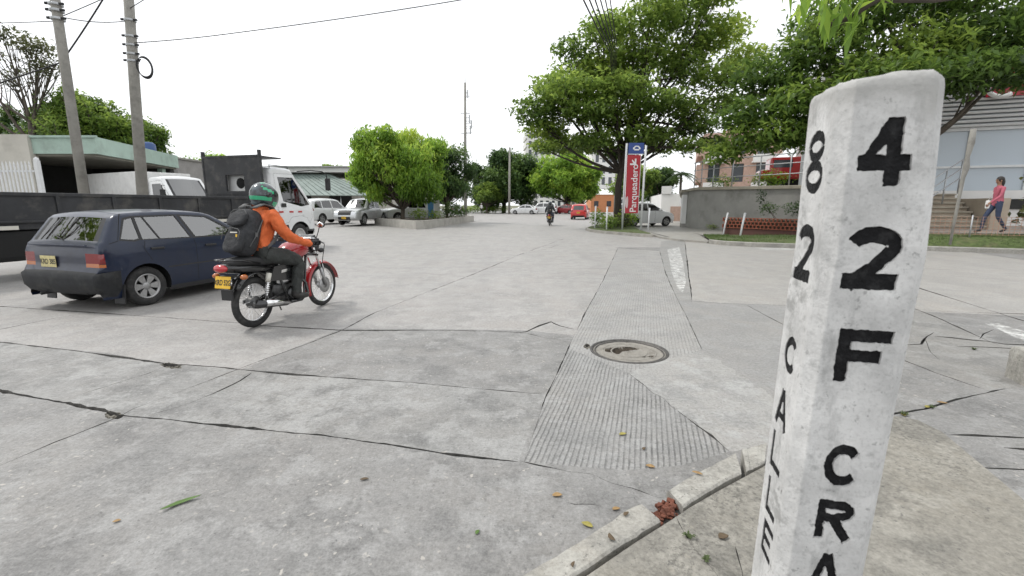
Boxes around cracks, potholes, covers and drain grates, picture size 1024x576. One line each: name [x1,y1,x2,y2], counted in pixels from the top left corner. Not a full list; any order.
manhole cover [590,339,669,364]
crack [909,310,1024,357]
